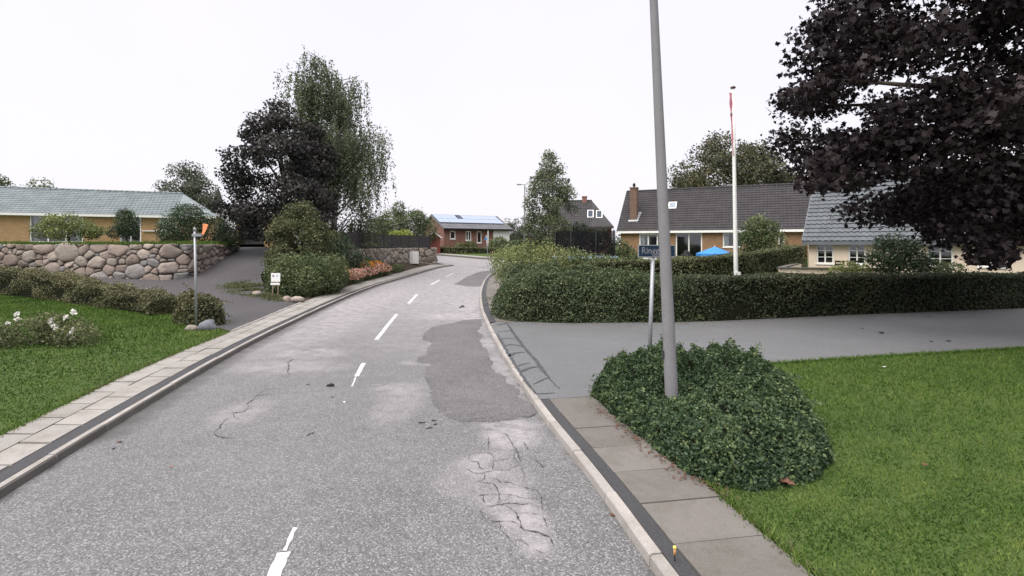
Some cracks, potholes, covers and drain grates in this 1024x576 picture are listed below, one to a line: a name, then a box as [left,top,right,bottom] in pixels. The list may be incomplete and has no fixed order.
crack [214,350,317,438]
crack [466,425,554,552]
